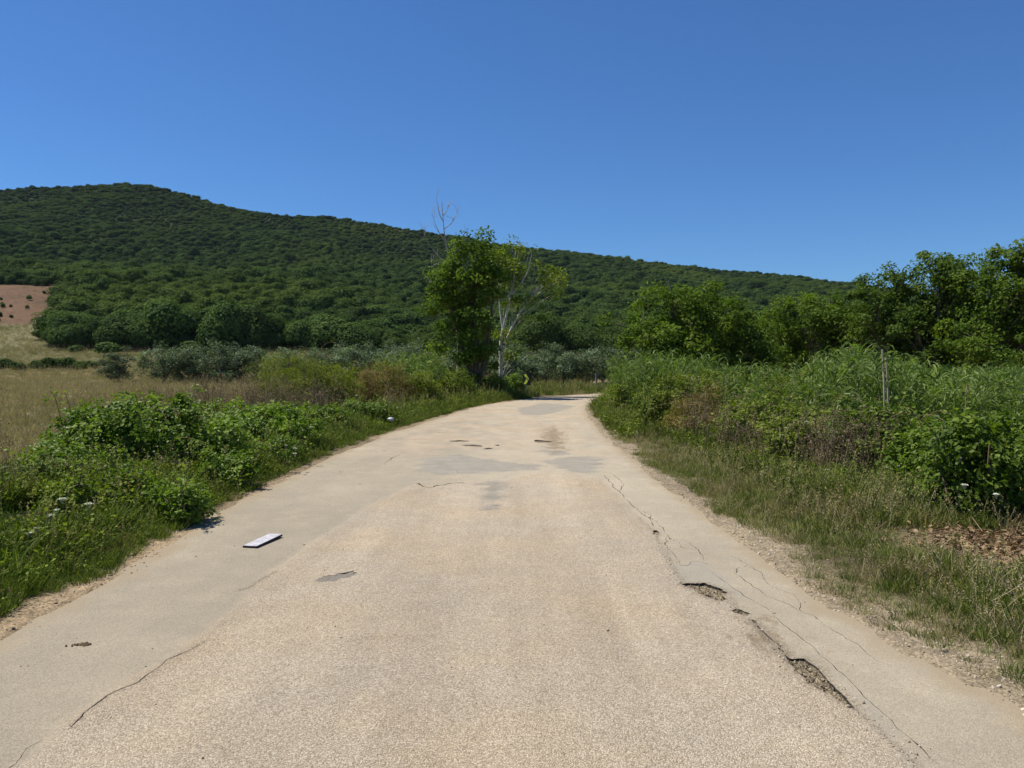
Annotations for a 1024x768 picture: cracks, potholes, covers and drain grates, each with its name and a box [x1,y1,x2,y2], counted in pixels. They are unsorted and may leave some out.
pothole [682,583,727,601]
crack [70,643,202,728]
crack [604,474,706,566]
crack [717,555,935,762]
pothole [784,654,855,709]
